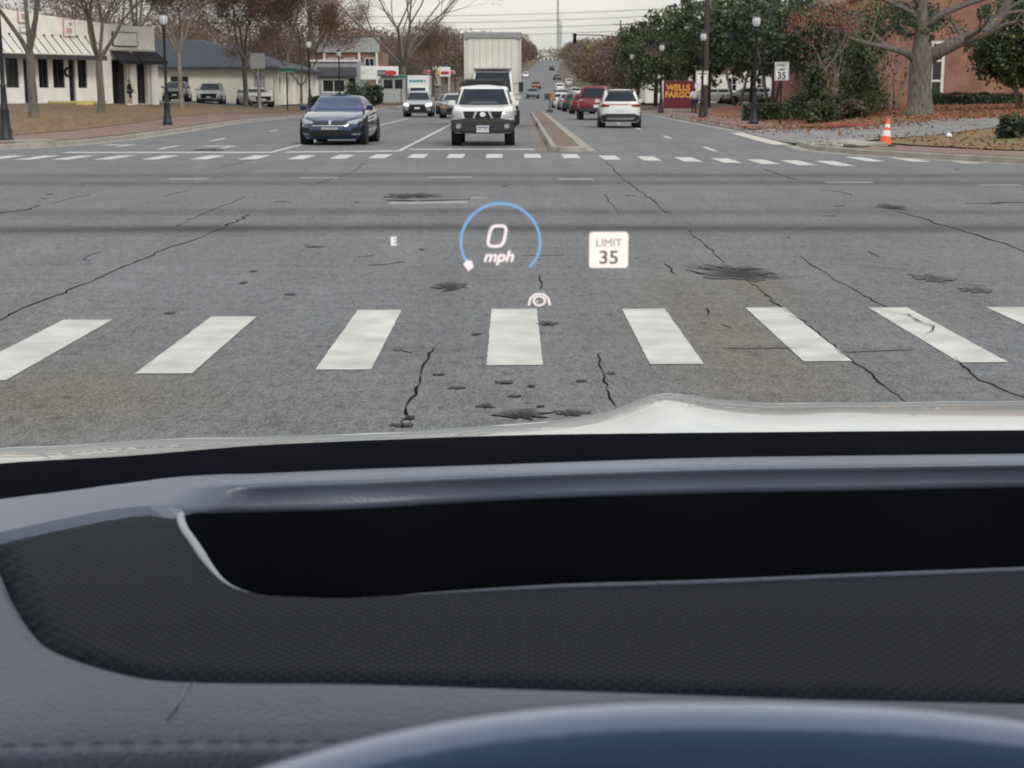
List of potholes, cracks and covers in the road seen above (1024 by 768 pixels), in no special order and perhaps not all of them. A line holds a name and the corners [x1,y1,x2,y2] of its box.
crack [393,347,434,426]
crack [664,230,913,402]
pothole [698,264,779,281]
pothole [554,408,591,417]
pothole [431,281,467,291]
crack [603,159,667,213]
crack [955,357,1024,397]
crack [0,197,248,320]
pothole [490,408,554,420]
pothole [909,273,956,282]
crack [598,352,616,406]
crack [897,211,1024,252]
